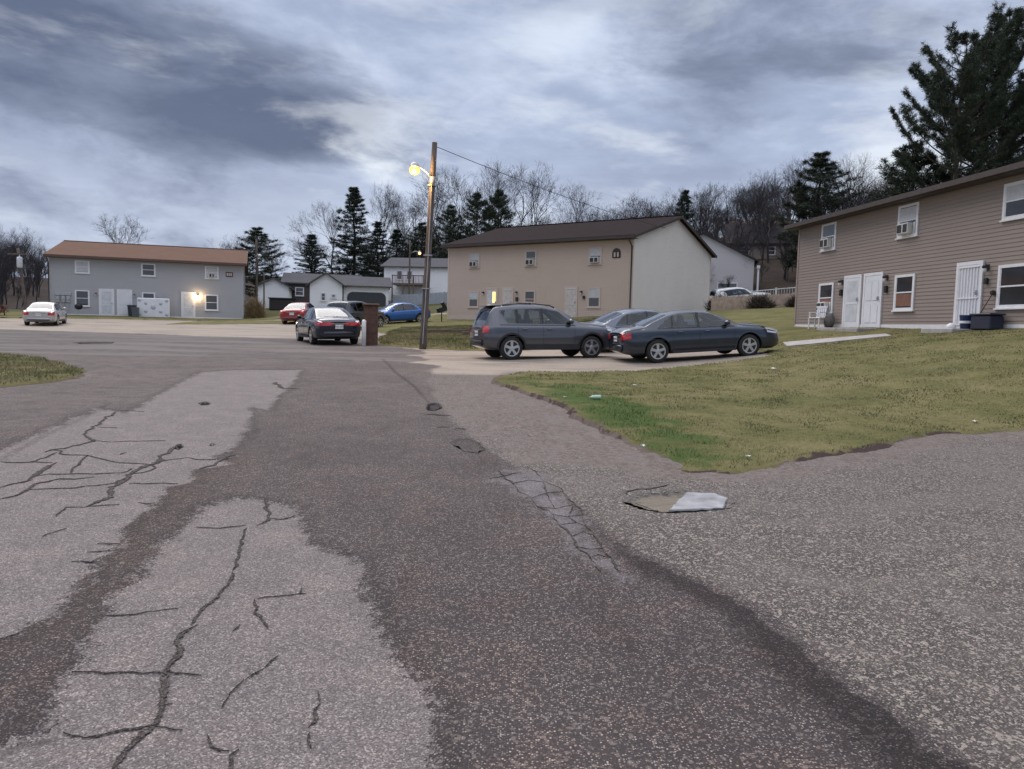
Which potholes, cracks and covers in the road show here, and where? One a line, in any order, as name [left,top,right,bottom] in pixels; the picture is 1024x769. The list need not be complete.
pothole [622,490,735,513]
crack [307,692,321,749]
crack [63,499,307,769]
pothole [451,438,486,453]
crack [0,410,235,536]
pothole [426,402,442,411]
